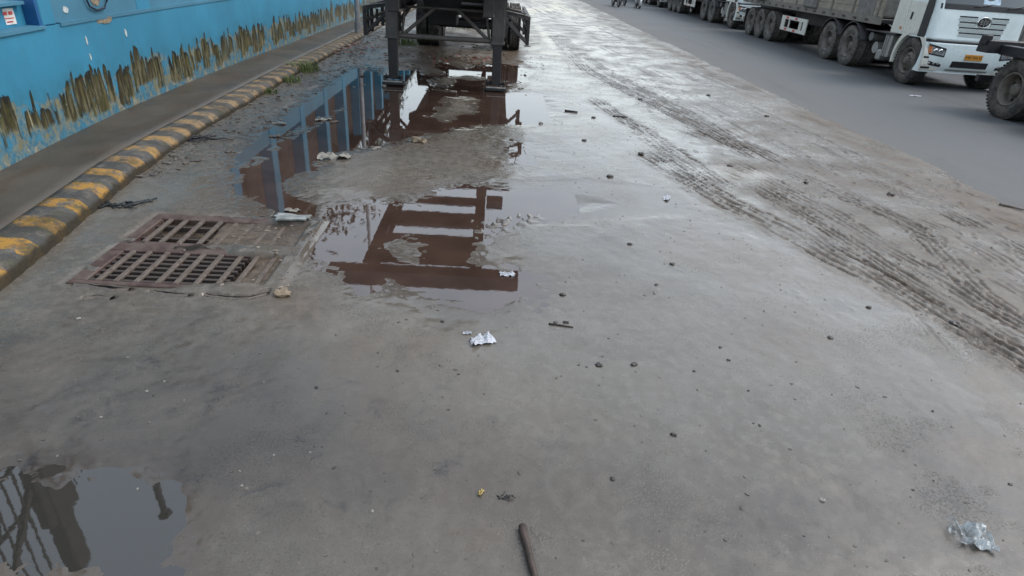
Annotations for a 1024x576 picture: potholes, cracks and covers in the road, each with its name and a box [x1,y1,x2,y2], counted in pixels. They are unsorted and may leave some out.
crack [72,282,131,301]
drain grate [66,214,302,293]
crack [150,290,267,299]
